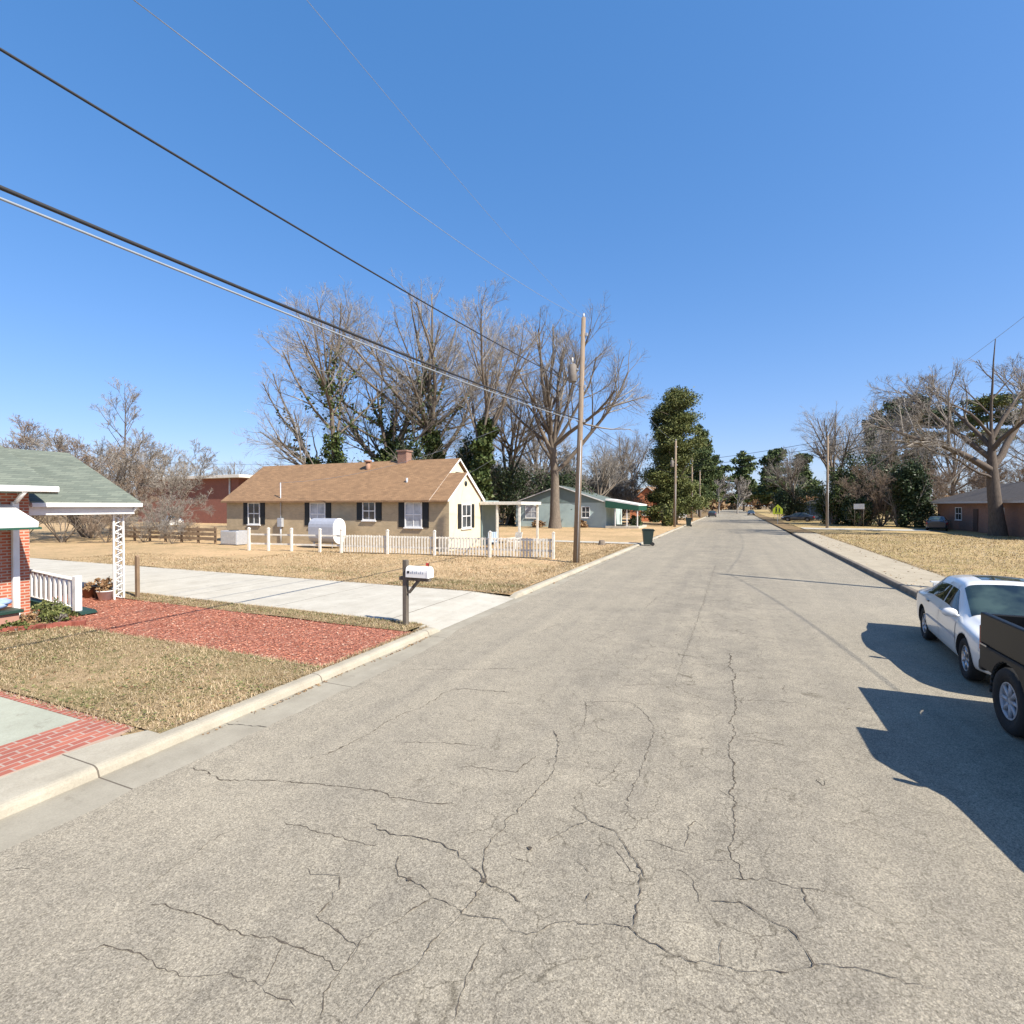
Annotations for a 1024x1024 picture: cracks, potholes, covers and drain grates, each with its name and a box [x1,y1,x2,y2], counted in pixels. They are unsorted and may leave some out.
crack [150,653,937,1017]
crack [79,944,179,976]
